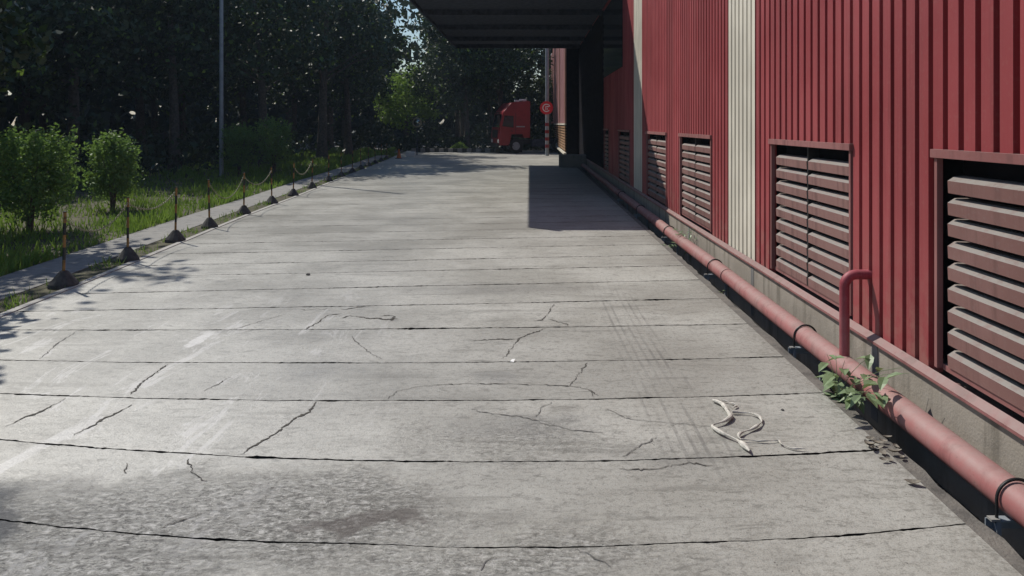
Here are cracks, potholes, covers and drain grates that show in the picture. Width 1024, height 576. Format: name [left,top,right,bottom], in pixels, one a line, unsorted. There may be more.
crack [74,364,168,435]
crack [242,402,316,454]
crack [303,306,398,329]
crack [388,363,708,470]
crack [472,304,568,358]
